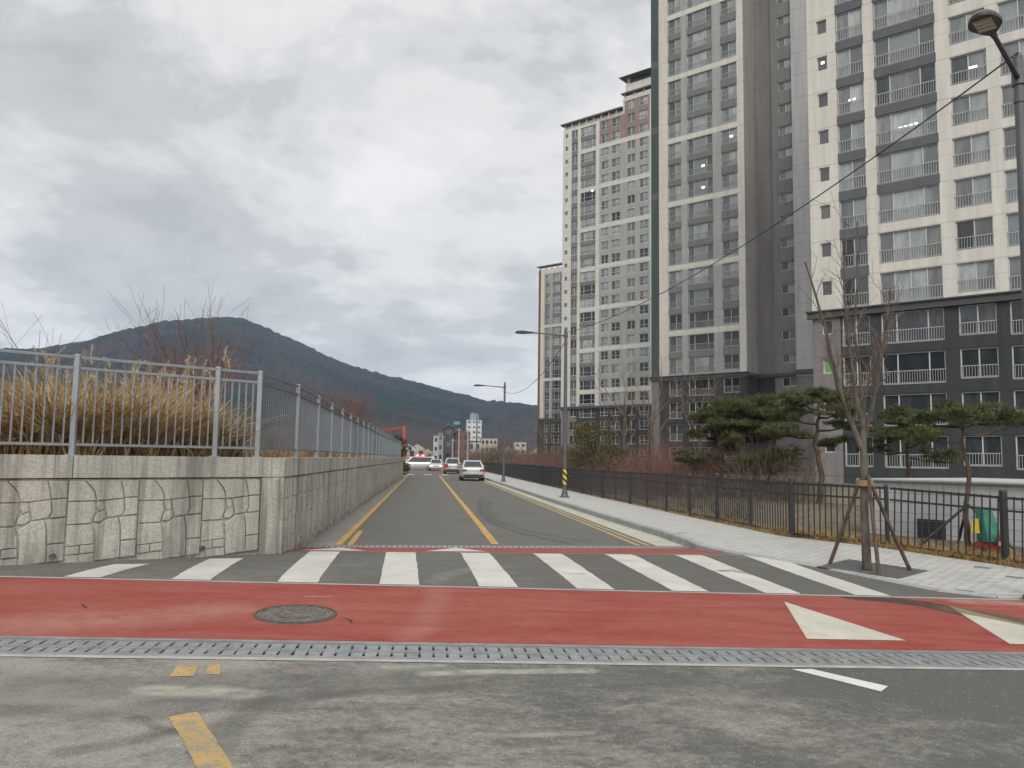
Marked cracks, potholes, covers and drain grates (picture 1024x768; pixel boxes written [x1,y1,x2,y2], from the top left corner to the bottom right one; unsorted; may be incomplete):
manhole cover [253,604,337,624]
